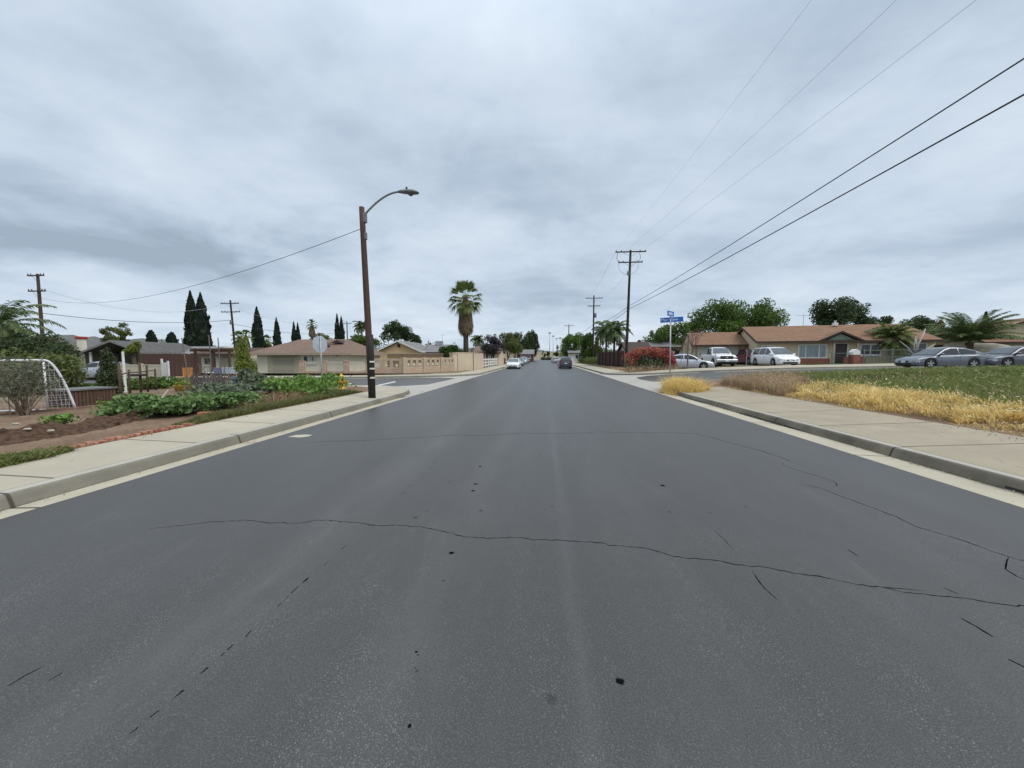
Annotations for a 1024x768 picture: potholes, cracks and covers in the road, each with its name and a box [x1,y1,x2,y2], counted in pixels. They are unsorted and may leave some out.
crack [130,546,345,734]
crack [151,520,1024,667]
crack [319,432,1024,579]
